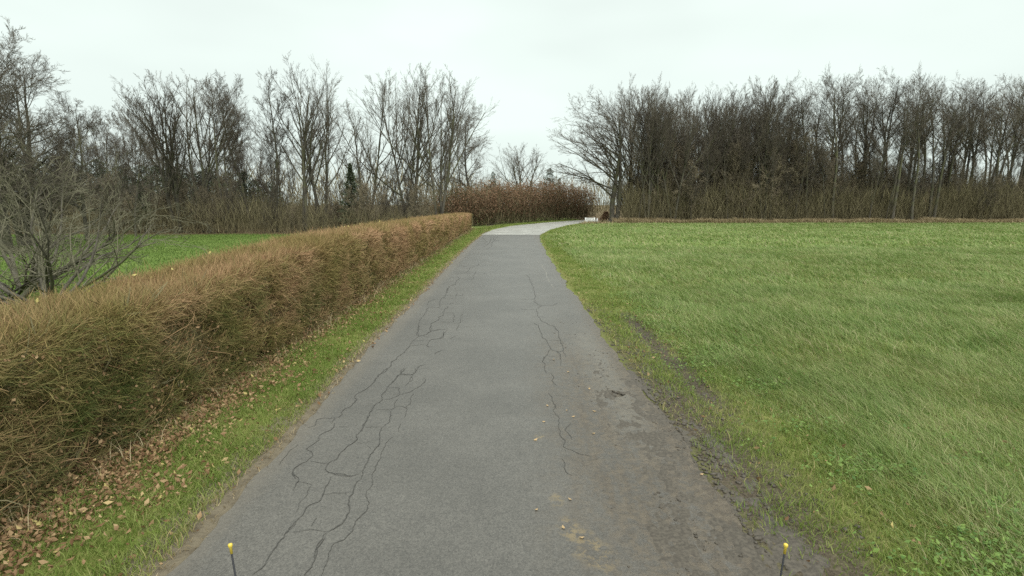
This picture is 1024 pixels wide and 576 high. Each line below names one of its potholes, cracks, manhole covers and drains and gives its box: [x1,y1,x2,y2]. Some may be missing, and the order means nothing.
crack [252,274,475,575]
crack [524,261,589,475]
